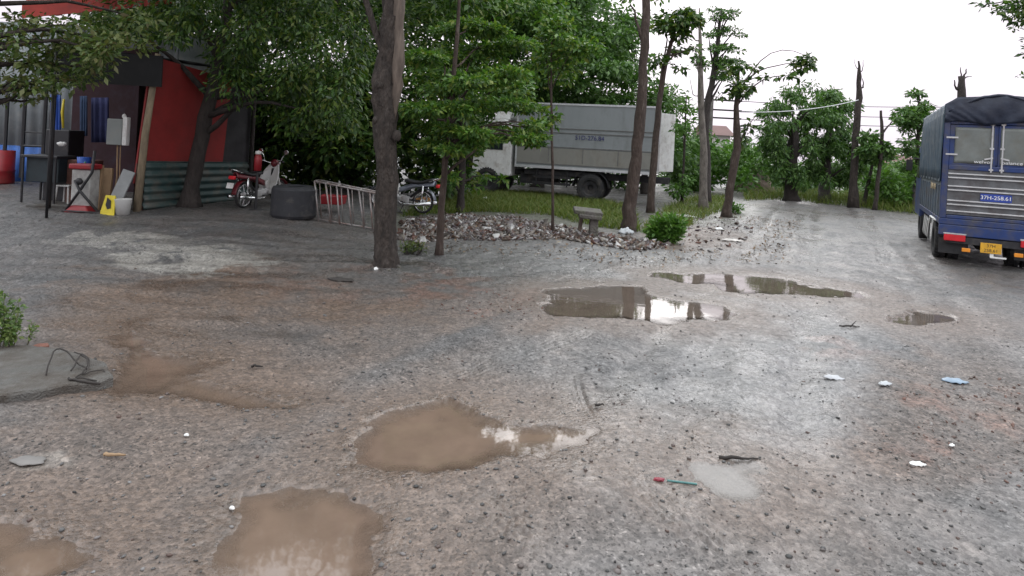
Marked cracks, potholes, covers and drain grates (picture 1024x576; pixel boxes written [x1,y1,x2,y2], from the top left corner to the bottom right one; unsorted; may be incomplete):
pothole [535,283,742,327]
pothole [874,308,965,326]
pothole [646,270,875,299]
pothole [0,506,134,576]
pothole [171,474,417,576]
pothole [321,393,615,489]
pothole [95,316,317,413]
